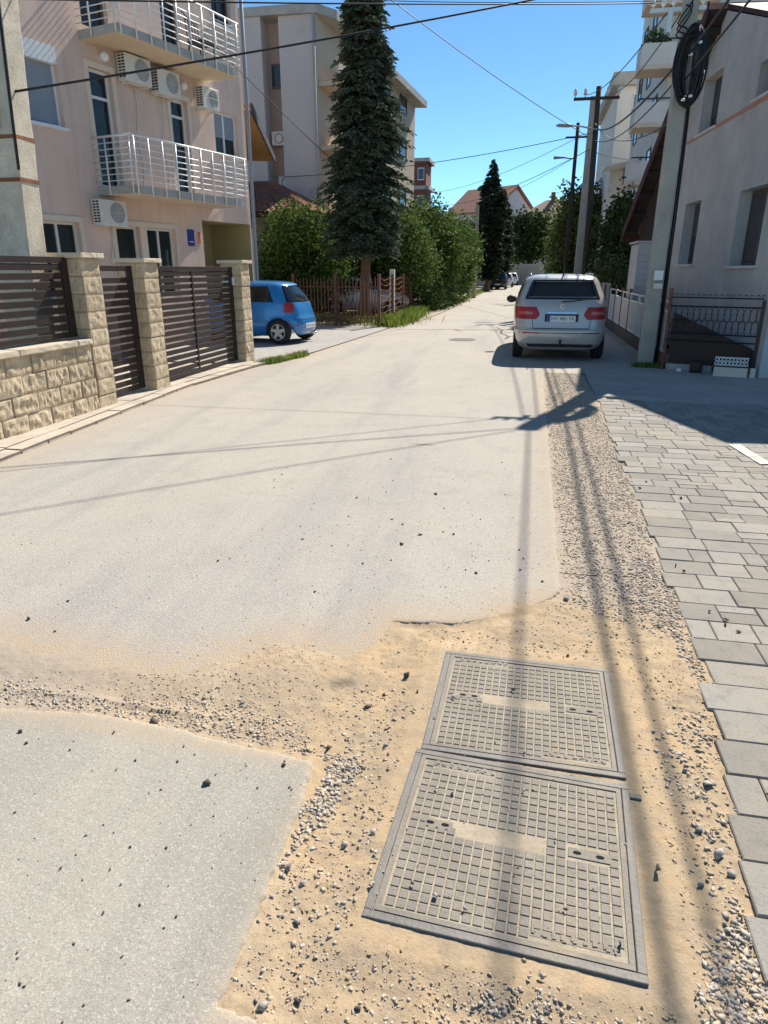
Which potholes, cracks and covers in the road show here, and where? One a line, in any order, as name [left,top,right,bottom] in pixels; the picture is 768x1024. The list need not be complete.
manhole cover [362,748,649,987]
manhole cover [421,651,626,780]
